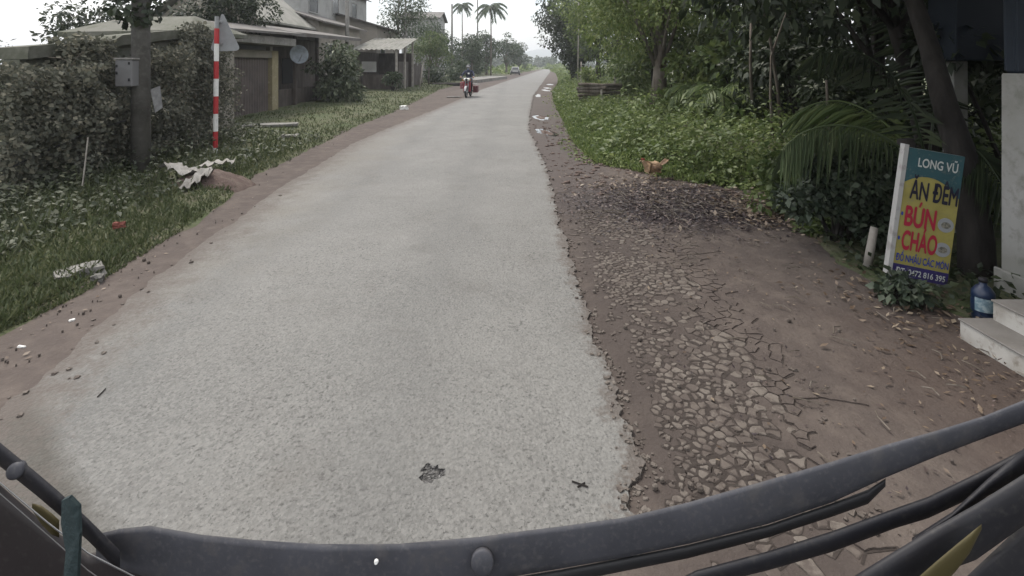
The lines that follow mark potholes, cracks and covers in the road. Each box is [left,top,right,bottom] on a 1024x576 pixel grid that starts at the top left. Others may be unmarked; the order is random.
pothole [419,463,446,483]
crack [570,207,899,576]
